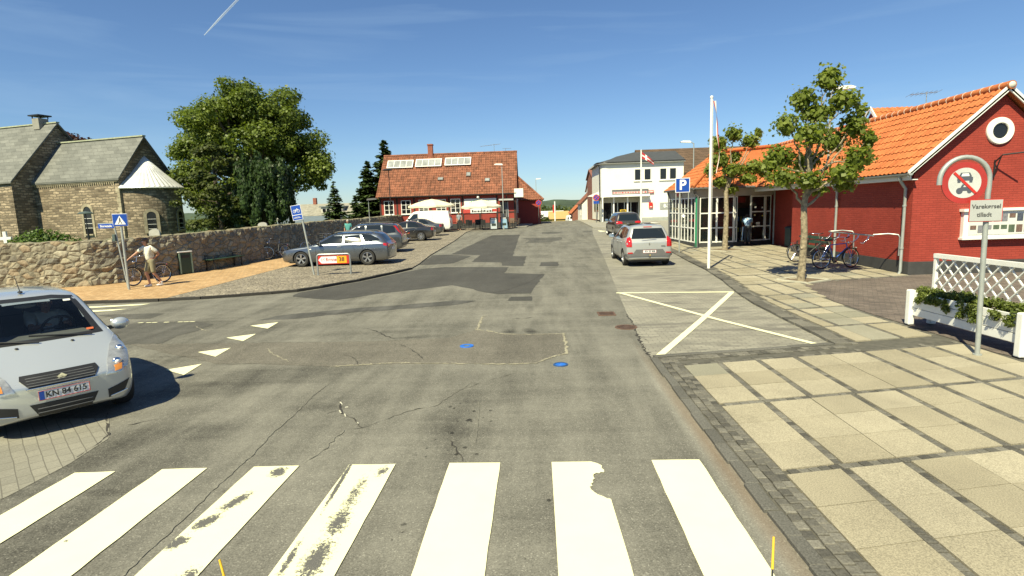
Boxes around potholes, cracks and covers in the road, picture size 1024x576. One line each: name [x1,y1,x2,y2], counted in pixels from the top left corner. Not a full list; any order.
crack [329,401,359,425]
